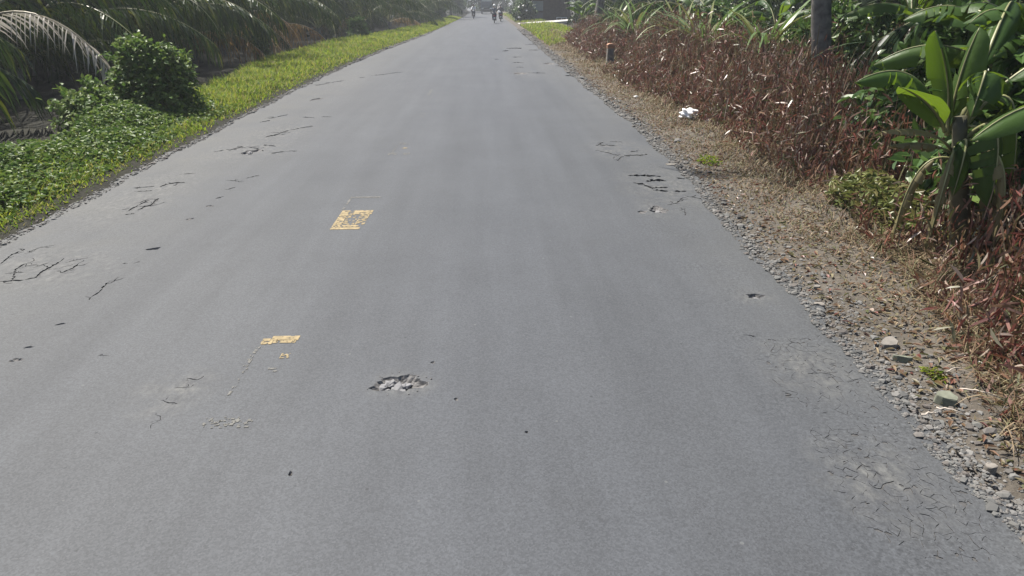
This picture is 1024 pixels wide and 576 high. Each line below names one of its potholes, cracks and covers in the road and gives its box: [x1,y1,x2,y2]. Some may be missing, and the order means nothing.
crack [149,376,204,428]
crack [216,114,324,154]
crack [596,141,703,216]
crack [122,173,192,215]
crack [0,245,140,300]
crack [749,335,909,419]
pothole [367,371,432,395]
